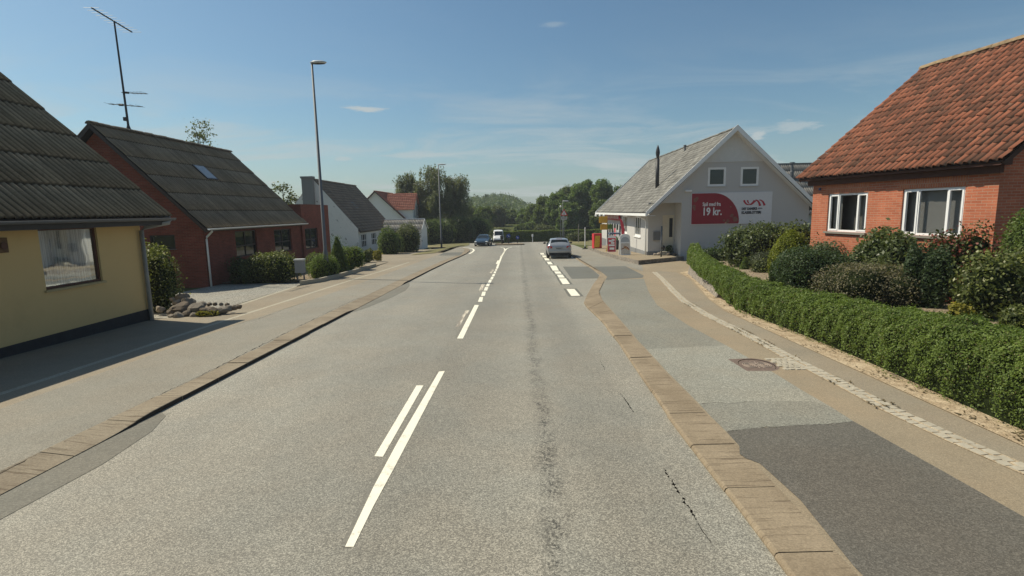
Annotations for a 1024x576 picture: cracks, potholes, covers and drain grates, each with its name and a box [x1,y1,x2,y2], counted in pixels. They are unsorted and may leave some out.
manhole cover [728,358,779,371]
crack [665,470,711,542]
